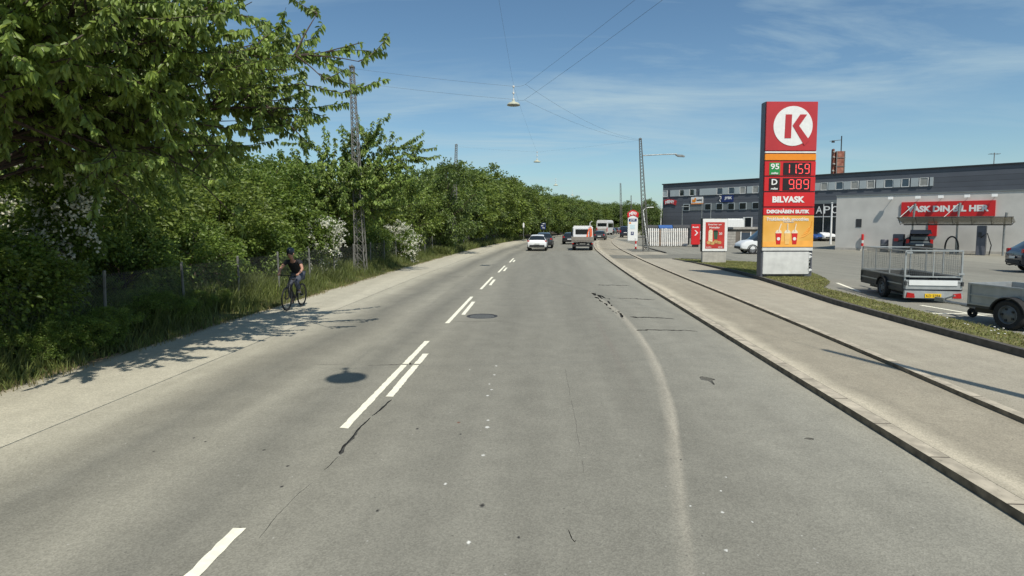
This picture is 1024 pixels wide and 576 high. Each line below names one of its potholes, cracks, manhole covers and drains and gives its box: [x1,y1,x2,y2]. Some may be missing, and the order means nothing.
crack [260,400,391,537]
crack [592,285,690,331]
